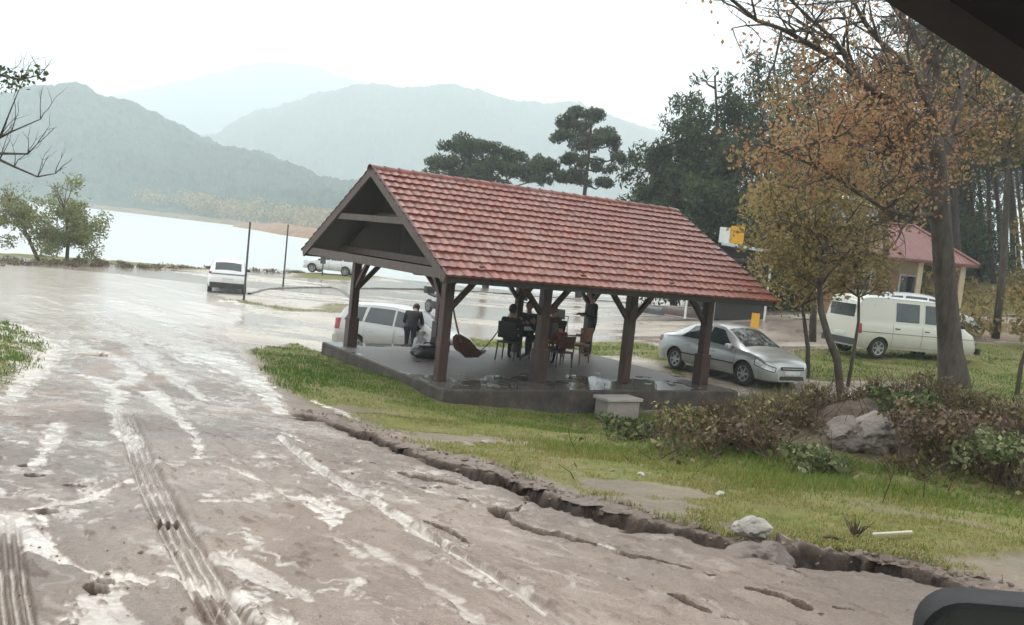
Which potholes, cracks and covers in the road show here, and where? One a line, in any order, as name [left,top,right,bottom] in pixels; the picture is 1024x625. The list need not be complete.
pothole [82,582,112,595]
crack [292,413,967,621]
